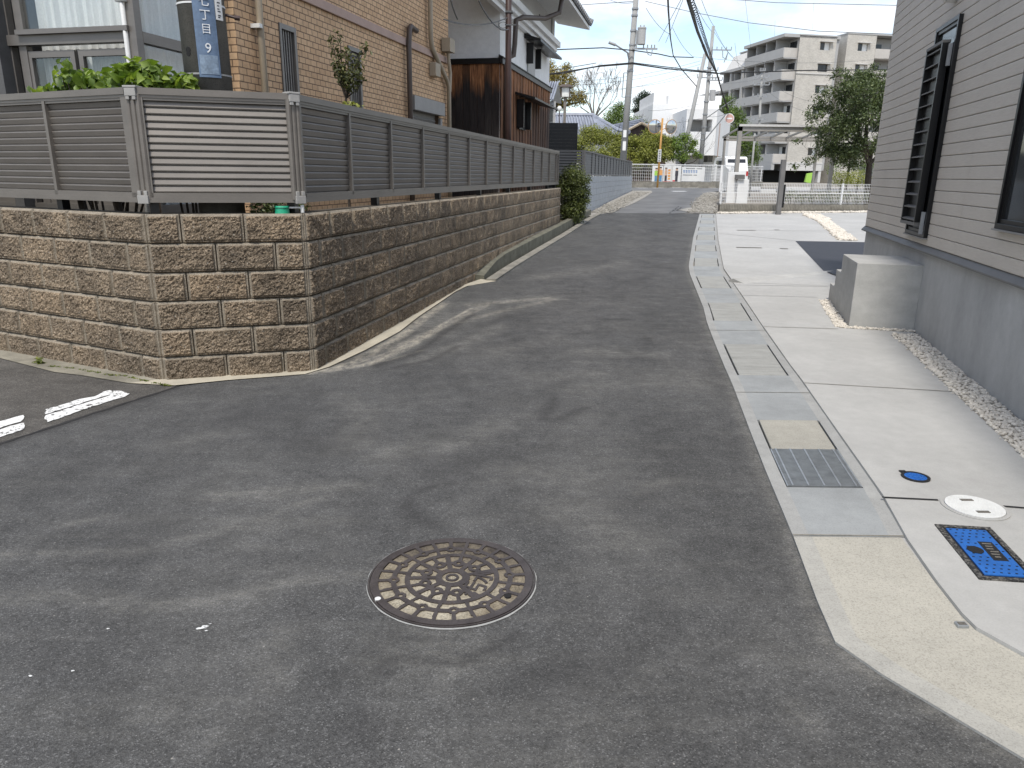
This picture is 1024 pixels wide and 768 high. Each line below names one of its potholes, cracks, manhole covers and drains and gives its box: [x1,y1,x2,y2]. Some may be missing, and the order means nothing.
utility cover [940,494,1011,521]
drain grate [770,448,862,488]
manhole cover [366,538,537,630]
utility cover [899,470,931,483]
